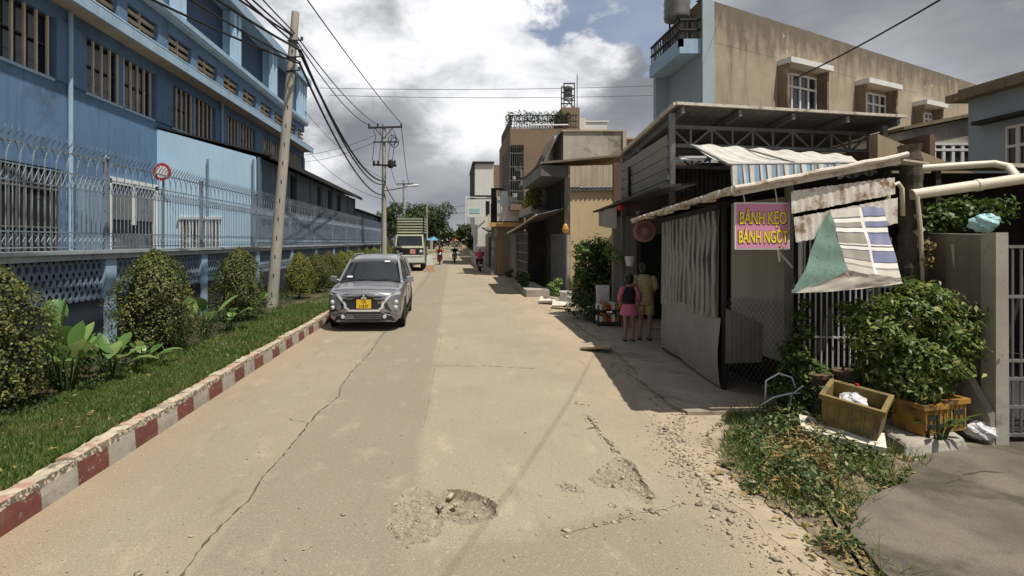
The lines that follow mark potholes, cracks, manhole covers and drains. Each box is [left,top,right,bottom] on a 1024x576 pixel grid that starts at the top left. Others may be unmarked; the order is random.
pothole [588,457,660,507]
pothole [431,488,499,525]
crack [561,499,710,539]
crack [946,470,1007,483]
crack [575,401,621,454]
crack [180,274,430,576]
